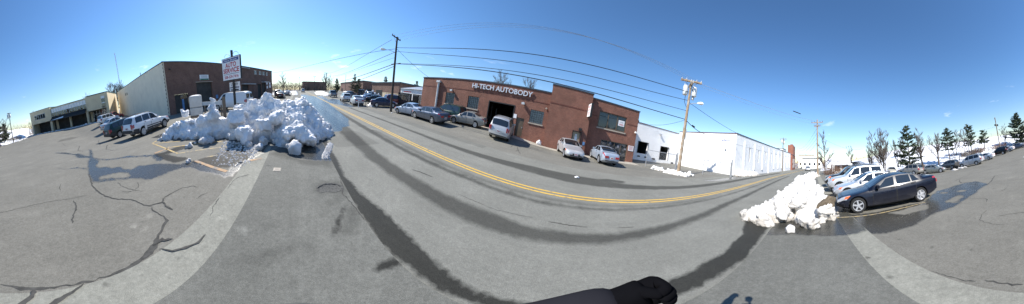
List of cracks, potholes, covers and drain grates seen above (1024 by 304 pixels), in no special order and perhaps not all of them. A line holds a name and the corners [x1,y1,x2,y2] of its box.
crack [0,163,1024,304]
